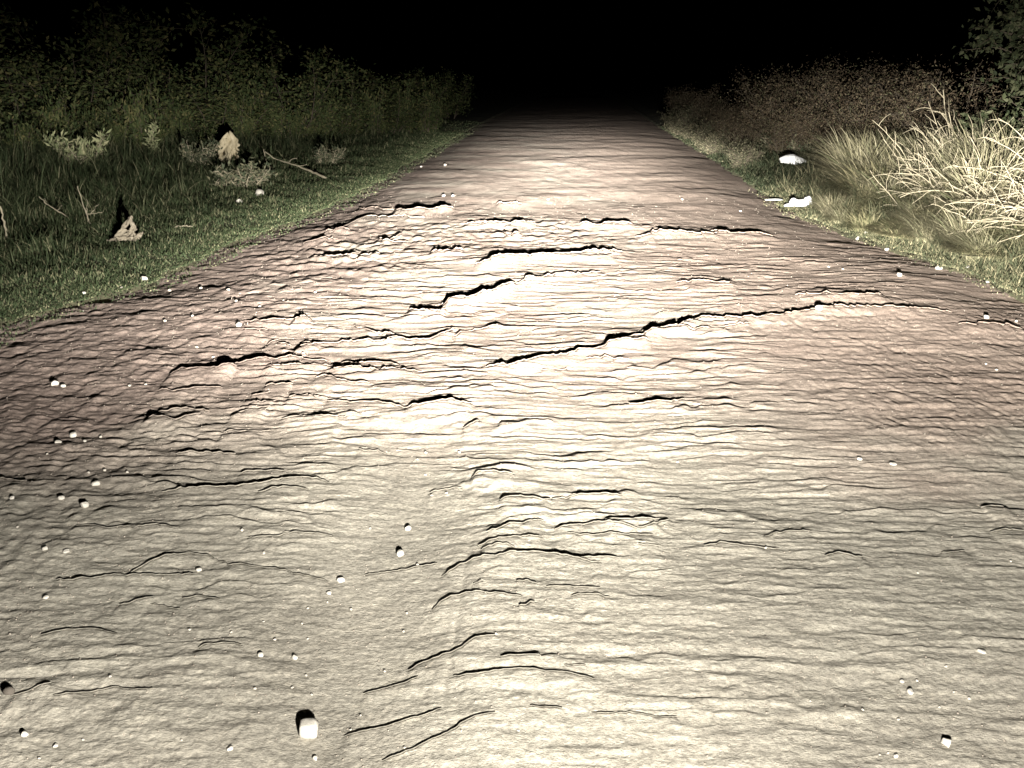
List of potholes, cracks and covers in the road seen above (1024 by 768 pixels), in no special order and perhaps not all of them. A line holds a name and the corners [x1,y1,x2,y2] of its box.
crack [365,517,669,609]
crack [482,290,1023,370]
crack [171,201,773,433]
crack [344,634,594,761]
